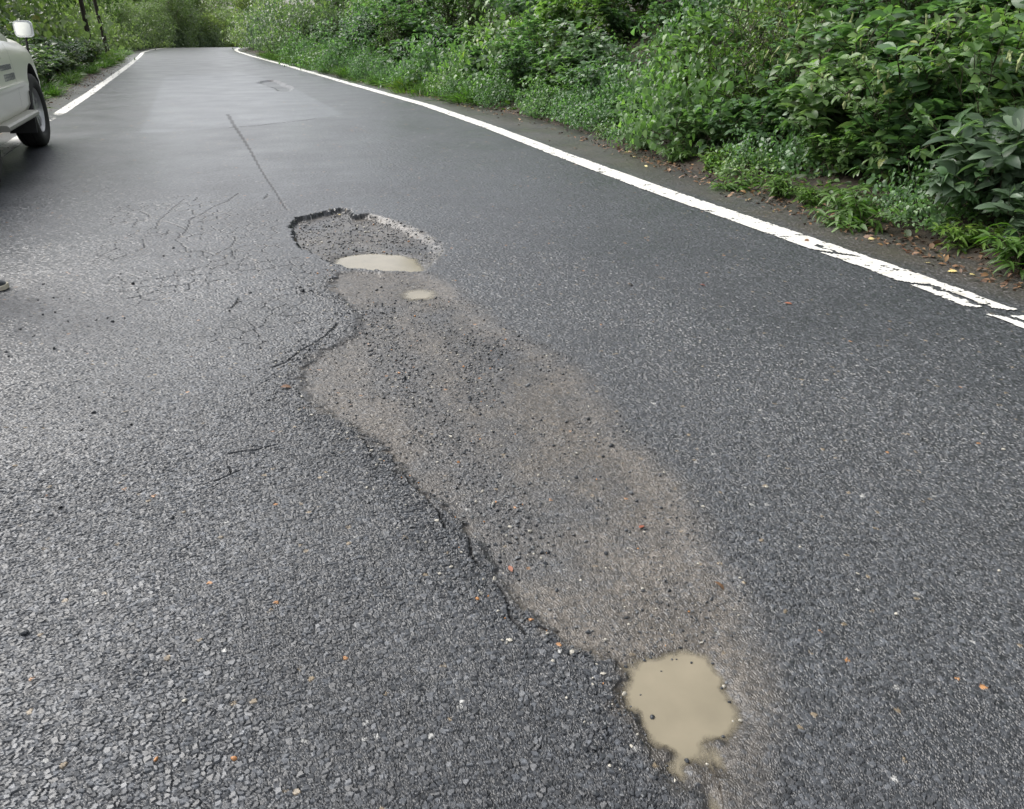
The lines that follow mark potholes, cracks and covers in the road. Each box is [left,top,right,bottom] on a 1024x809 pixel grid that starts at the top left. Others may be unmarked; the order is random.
crack [469,542,528,635]
crack [365,442,448,529]
pothole [286,207,447,272]
pothole [291,270,782,809]
crack [86,193,339,368]
